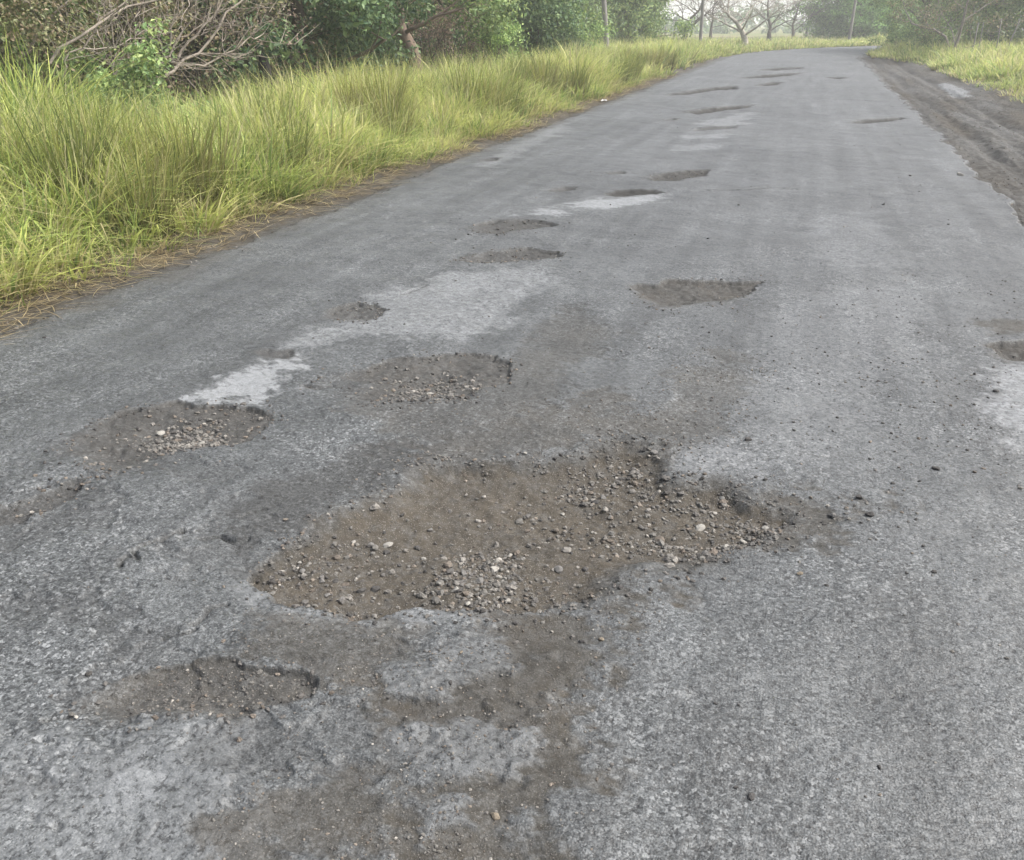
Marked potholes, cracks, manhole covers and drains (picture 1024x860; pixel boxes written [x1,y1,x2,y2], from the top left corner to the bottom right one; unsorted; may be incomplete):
pothole [682,104,757,115]
pothole [70,655,321,727]
pothole [52,400,276,476]
pothole [599,189,666,197]
pothole [450,247,564,264]
pothole [983,340,1024,364]
pothole [248,434,807,621]
pothole [643,169,712,182]
pothole [308,352,513,406]
pothole [321,302,387,322]
pothole [464,219,560,235]
pothole [667,86,739,96]
